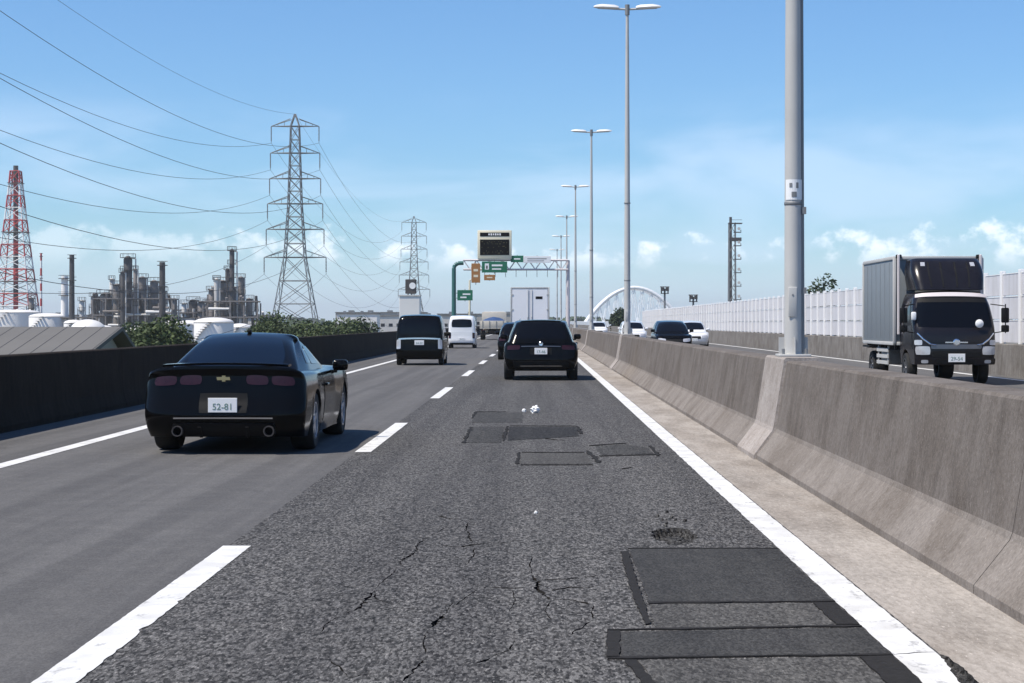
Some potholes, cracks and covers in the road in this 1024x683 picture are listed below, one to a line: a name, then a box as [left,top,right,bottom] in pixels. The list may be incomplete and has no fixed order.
pothole [651,528,698,545]
crack [320,516,596,681]
